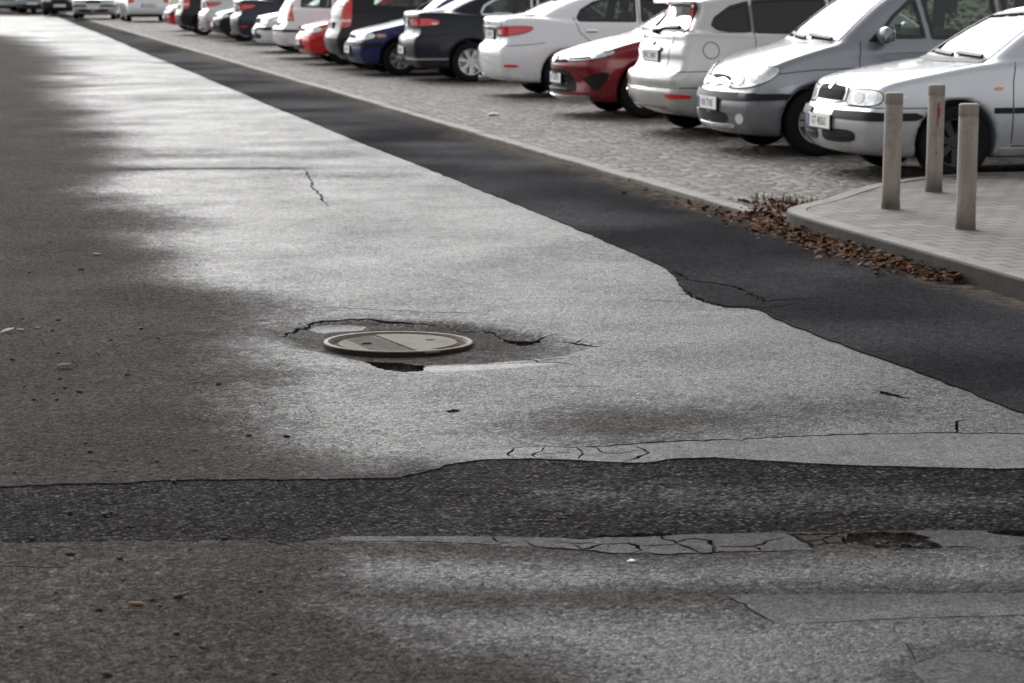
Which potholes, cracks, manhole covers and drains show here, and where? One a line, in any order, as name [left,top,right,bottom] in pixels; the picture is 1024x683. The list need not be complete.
pothole [845,532,943,550]
crack [725,595,1012,625]
crack [136,168,329,207]
crack [903,641,943,664]
pothole [503,336,546,346]
manhole cover [323,331,473,357]
crack [347,532,968,556]
pothole [362,361,429,372]
crack [479,420,1019,462]
